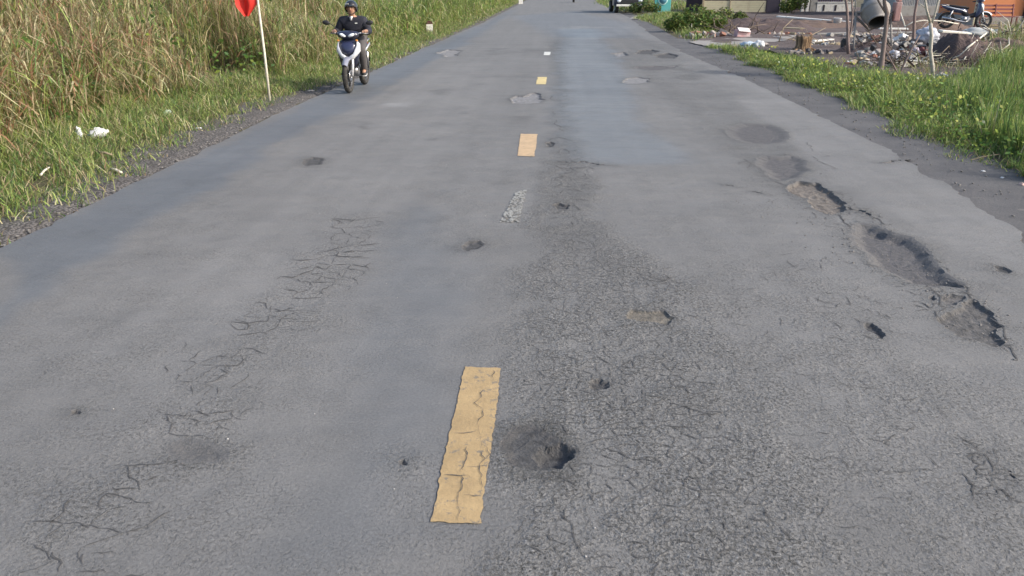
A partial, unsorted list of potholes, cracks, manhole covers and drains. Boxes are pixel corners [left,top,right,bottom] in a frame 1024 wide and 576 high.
crack [16,459,179,576]
pothole [863,322,886,340]
pothole [941,294,966,305]
pothole [587,378,610,391]
pothole [461,240,485,251]
crack [960,436,1024,504]
pothole [848,223,966,290]
pothole [302,157,325,166]
crack [155,302,319,436]
crack [515,232,946,576]
pothole [935,298,1008,347]
